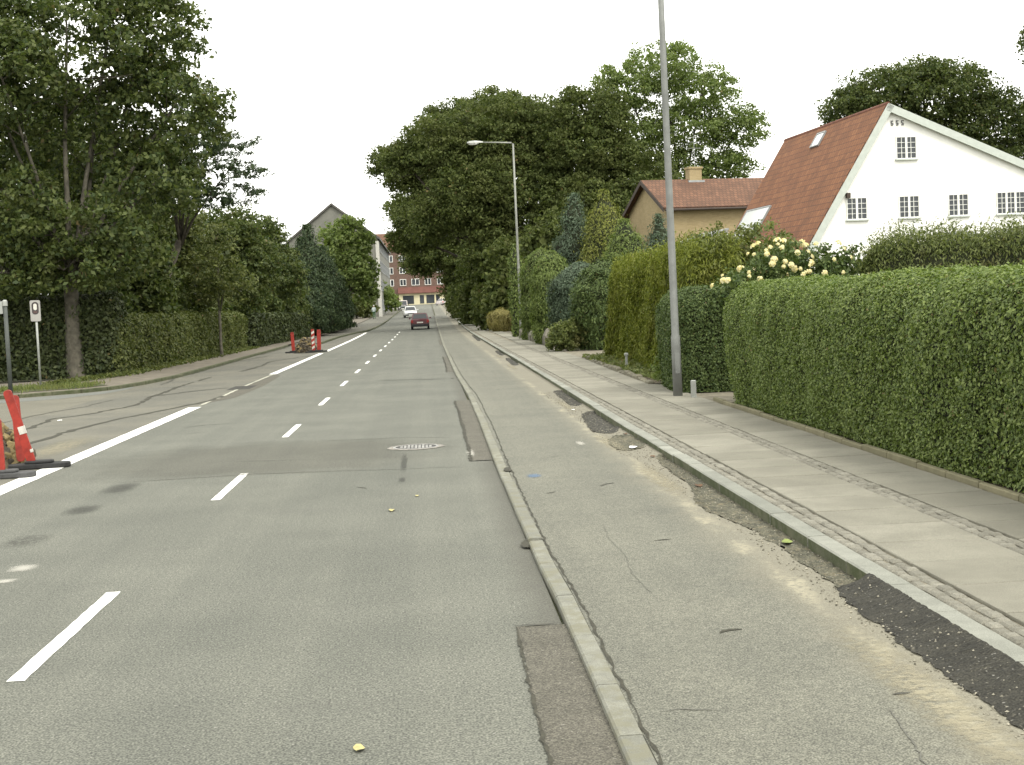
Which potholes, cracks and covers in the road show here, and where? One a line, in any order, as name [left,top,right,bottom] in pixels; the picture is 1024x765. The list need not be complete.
crack [888,692,928,765]
